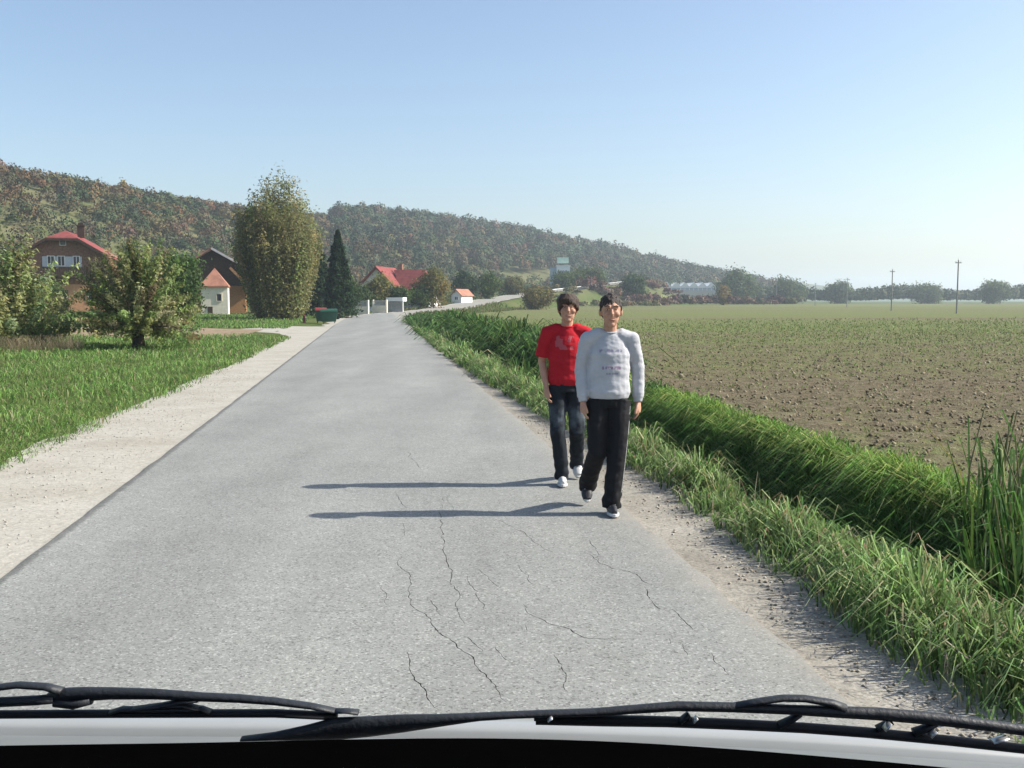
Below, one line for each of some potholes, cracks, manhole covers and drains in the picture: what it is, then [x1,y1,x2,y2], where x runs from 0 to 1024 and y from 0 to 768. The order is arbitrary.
crack [397,494,506,702]
crack [589,540,692,655]
